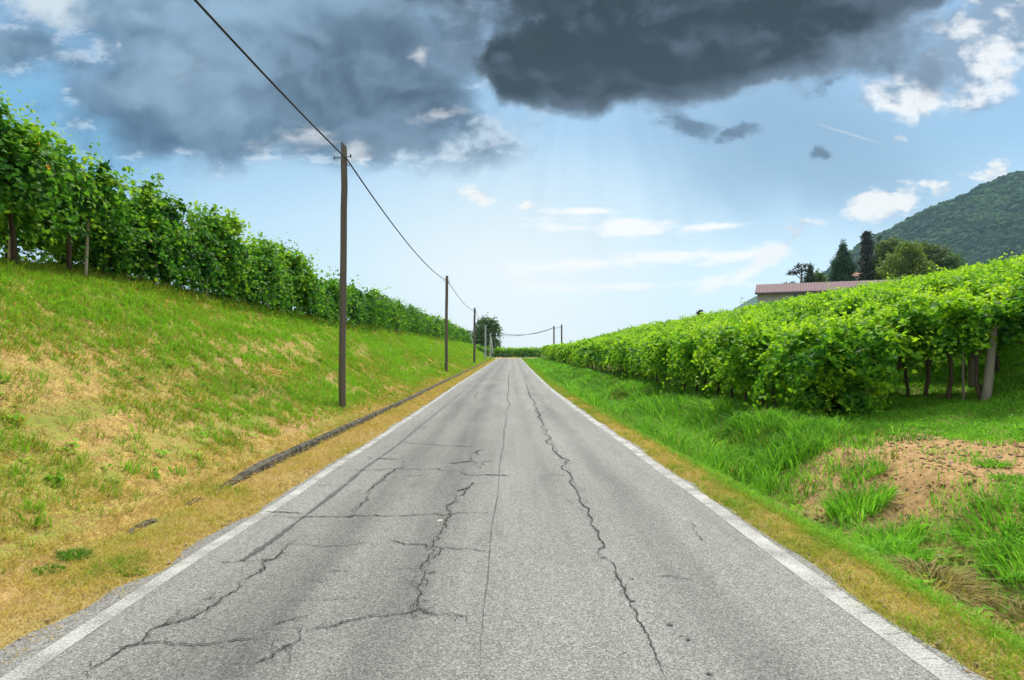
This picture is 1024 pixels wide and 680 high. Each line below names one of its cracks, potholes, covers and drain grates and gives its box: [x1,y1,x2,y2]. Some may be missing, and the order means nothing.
crack [83,442,496,675]
crack [523,381,666,677]
